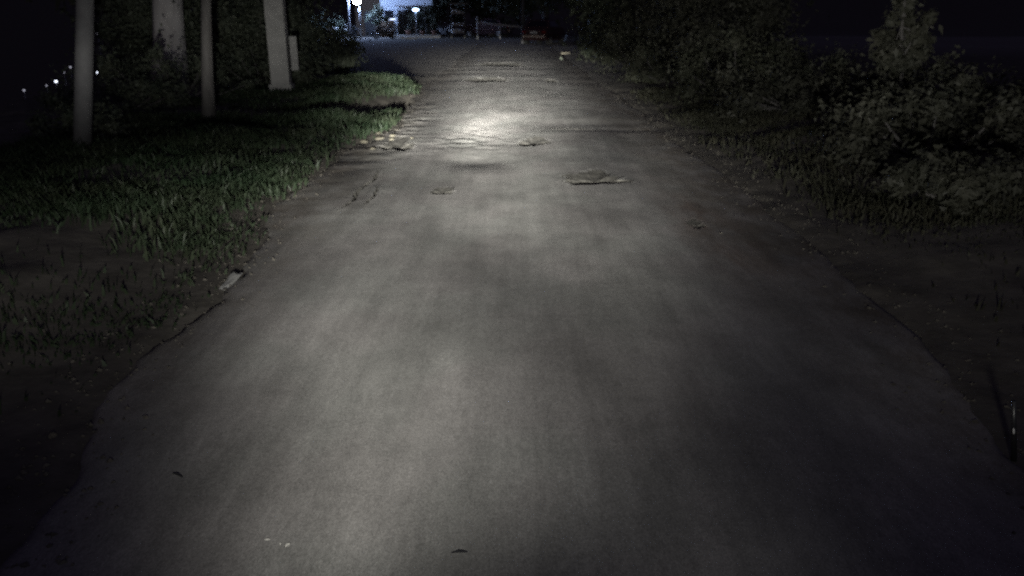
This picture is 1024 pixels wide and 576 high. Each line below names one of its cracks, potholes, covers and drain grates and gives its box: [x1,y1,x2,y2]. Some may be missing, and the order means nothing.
pothole [513,135,555,147]
pothole [557,167,635,186]
crack [330,169,385,211]
pothole [684,216,709,230]
pothole [427,185,460,195]
pothole [373,135,418,151]
